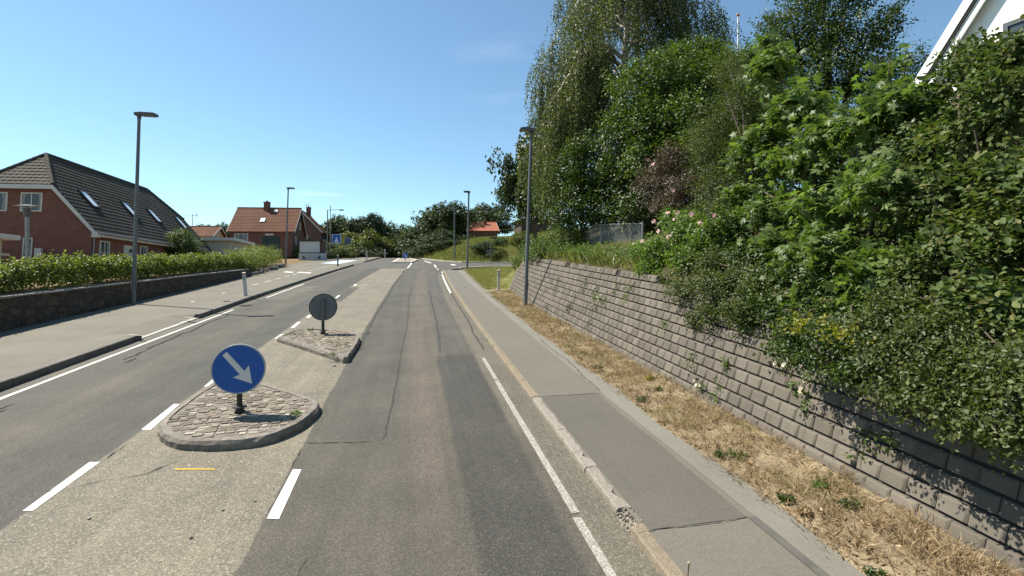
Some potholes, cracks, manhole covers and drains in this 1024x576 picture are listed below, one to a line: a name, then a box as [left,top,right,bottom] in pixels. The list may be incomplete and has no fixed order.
crack [292,289,411,465]
crack [429,292,484,353]
